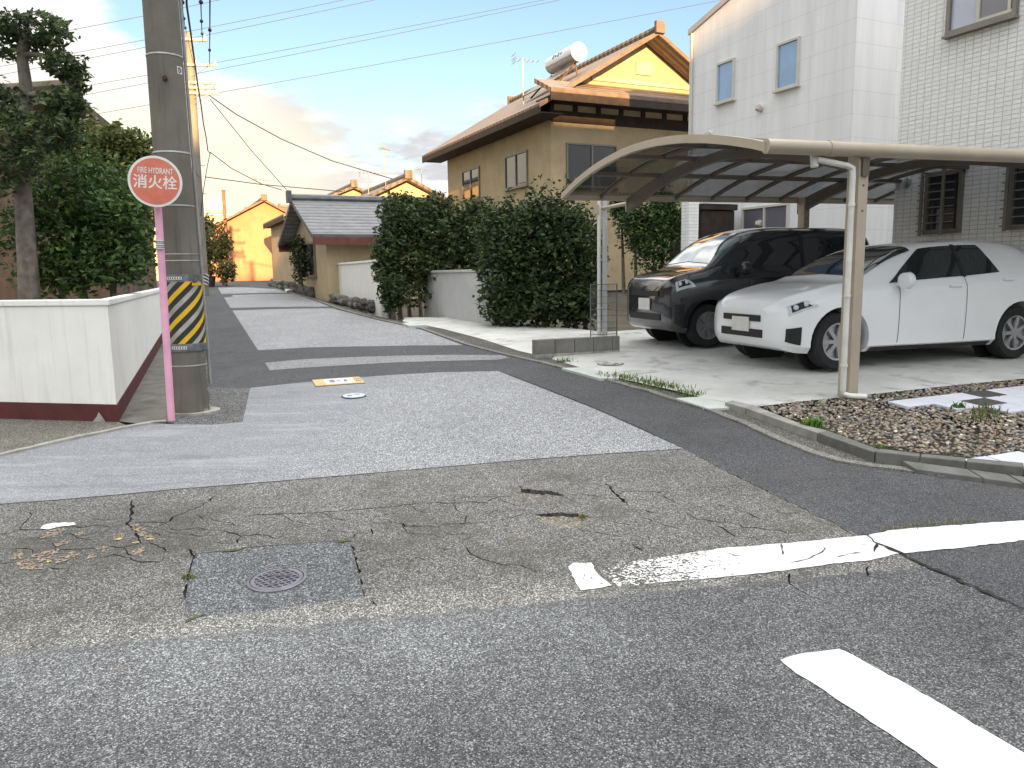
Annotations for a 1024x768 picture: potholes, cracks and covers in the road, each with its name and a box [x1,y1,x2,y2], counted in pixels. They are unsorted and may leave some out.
manhole cover [246,567,307,593]
crack [862,533,1024,609]
pothole [534,512,592,528]
crack [0,483,799,606]
